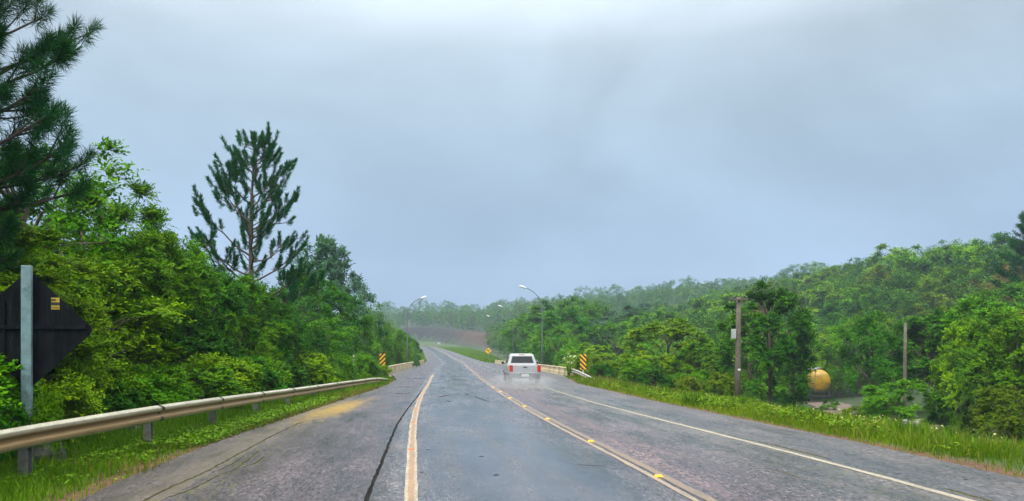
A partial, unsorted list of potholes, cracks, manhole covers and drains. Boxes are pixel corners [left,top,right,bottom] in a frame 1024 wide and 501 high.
crack [143,422,301,501]
